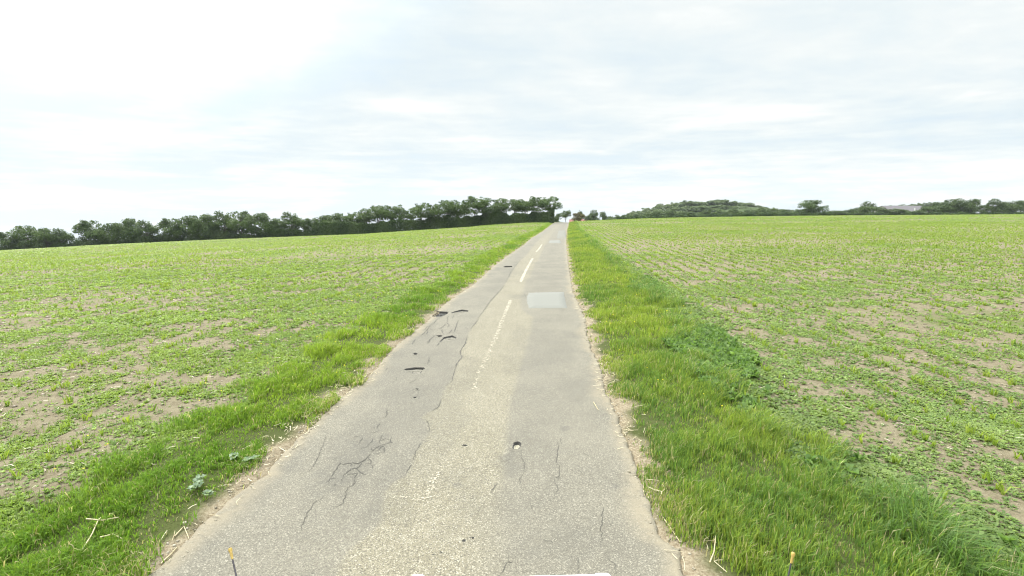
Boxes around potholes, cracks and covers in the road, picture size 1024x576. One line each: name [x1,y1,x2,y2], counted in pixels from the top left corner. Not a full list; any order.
pothole [436,335,460,343]
pothole [400,366,429,376]
pothole [508,439,526,452]
crack [393,271,512,473]
crack [308,409,393,505]
